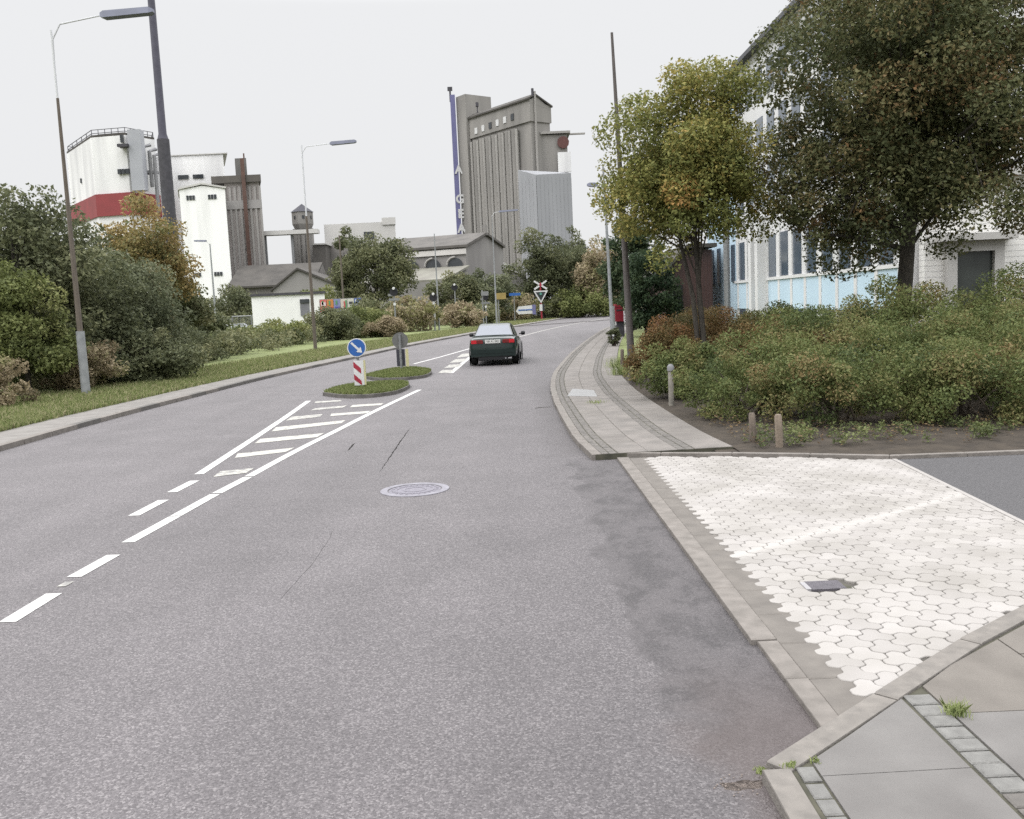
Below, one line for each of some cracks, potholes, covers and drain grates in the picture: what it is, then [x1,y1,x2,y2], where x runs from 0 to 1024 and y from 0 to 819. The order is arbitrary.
pothole [714,774,764,796]
utility cover [800,580,855,592]
manhole cover [380,482,449,497]
